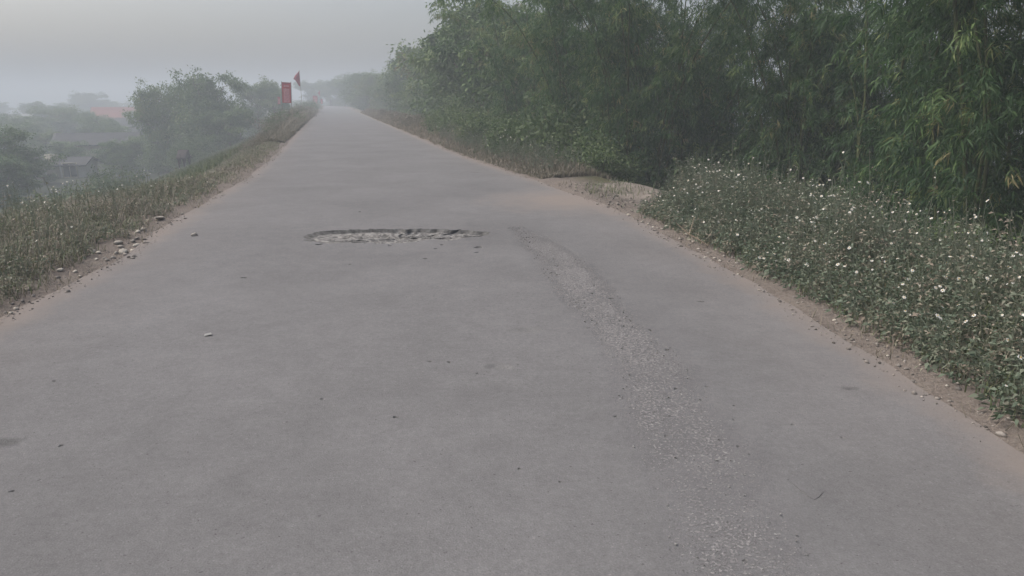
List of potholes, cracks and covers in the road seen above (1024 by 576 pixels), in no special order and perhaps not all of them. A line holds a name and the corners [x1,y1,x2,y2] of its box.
pothole [304,228,489,244]
